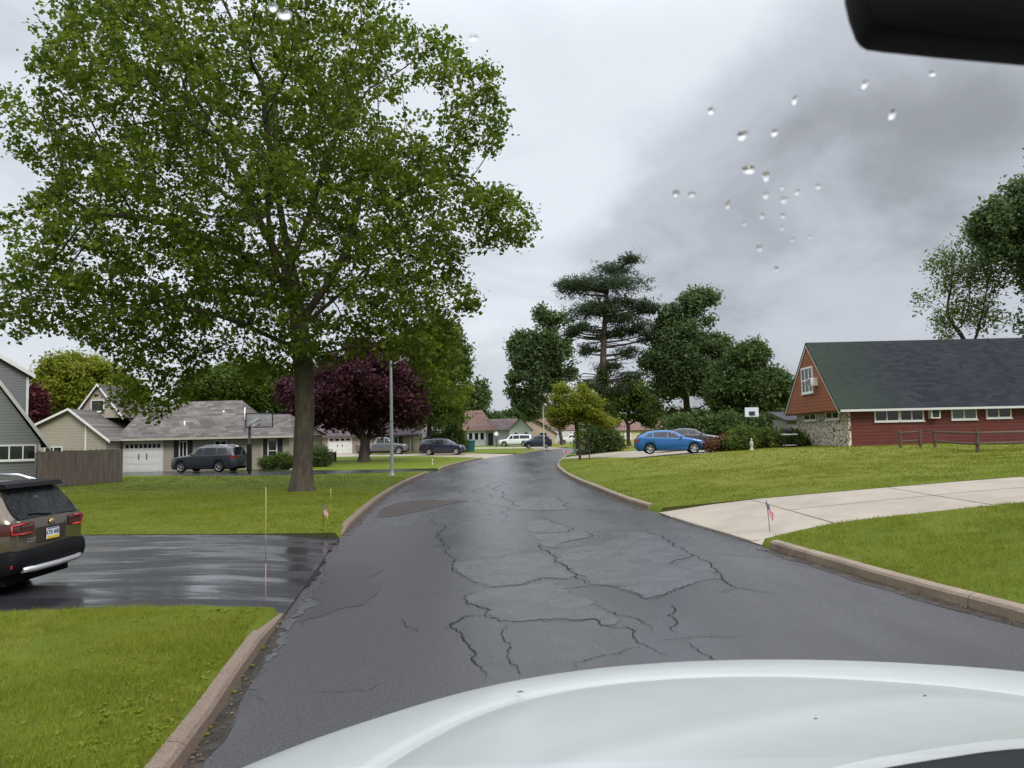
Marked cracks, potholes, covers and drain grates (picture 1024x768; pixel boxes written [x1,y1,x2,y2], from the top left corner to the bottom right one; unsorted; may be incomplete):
crack [396,486,771,678]
